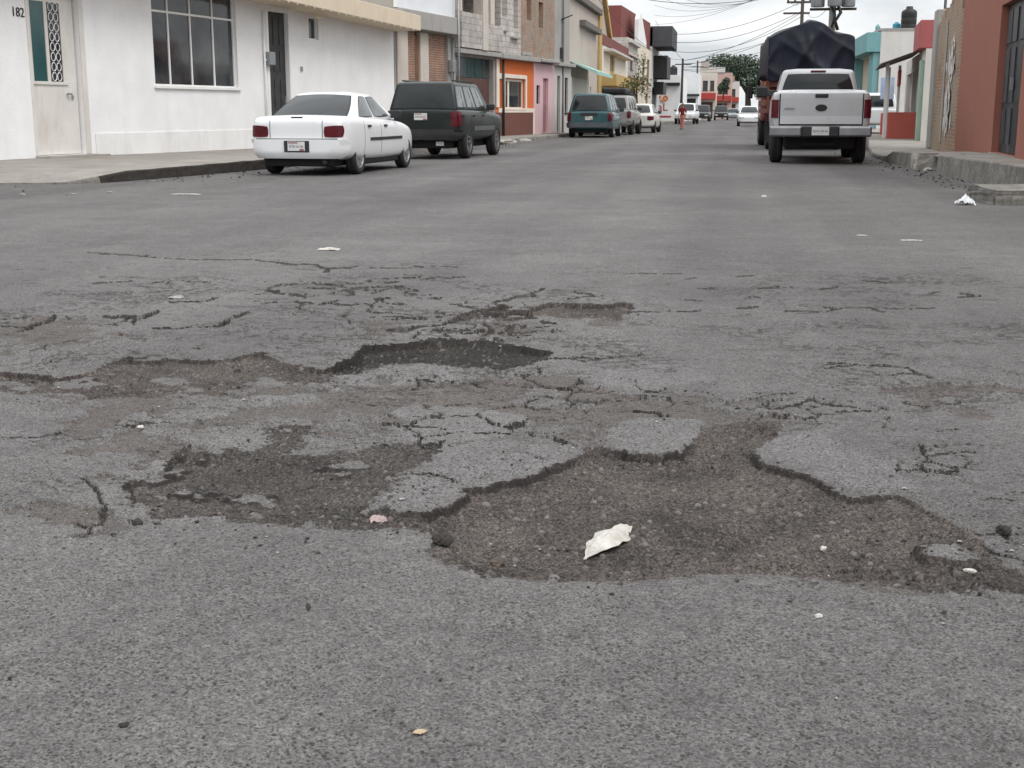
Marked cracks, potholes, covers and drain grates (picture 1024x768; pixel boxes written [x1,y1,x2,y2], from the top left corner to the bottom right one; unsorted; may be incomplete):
crack [2,431,146,538]
crack [823,362,934,379]
crack [889,428,993,478]
pothole [121,424,443,532]
pothole [0,352,338,400]
pothole [458,302,635,321]
pothole [323,338,553,375]
crack [735,392,961,432]
crack [352,353,727,418]
crack [1,252,603,352]
pothole [367,420,1024,595]
crack [630,273,981,313]
